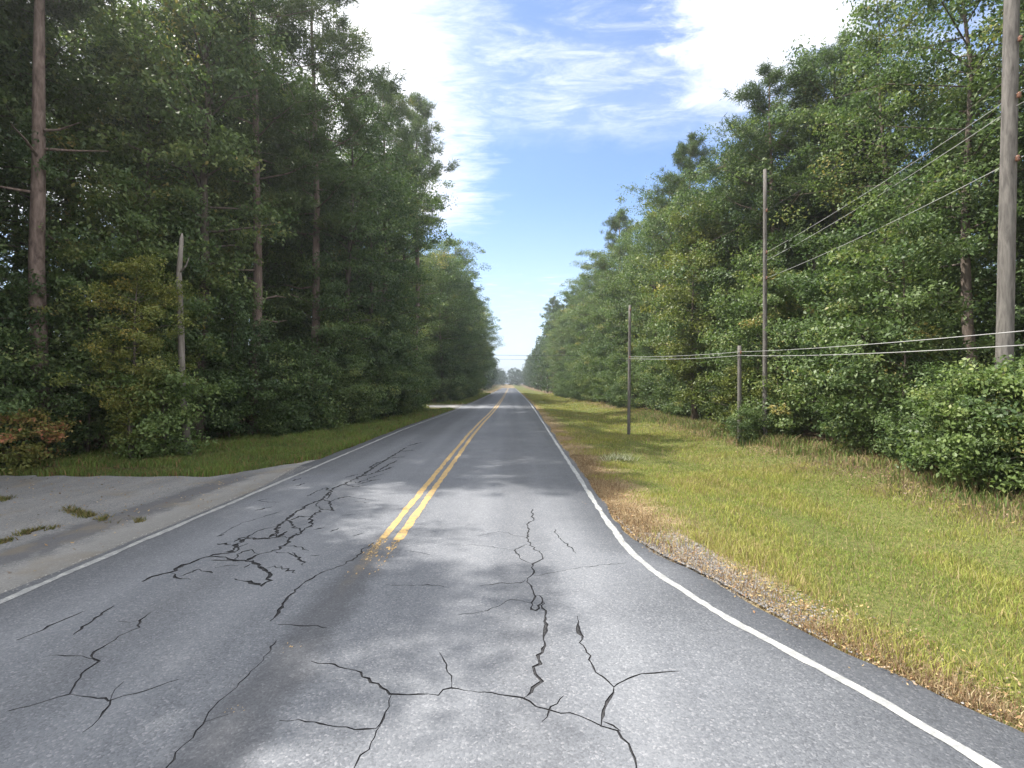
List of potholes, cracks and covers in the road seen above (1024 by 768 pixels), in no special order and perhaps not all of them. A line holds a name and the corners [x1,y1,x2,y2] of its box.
crack [9,606,179,733]
crack [142,443,418,768]
crack [279,509,677,768]
